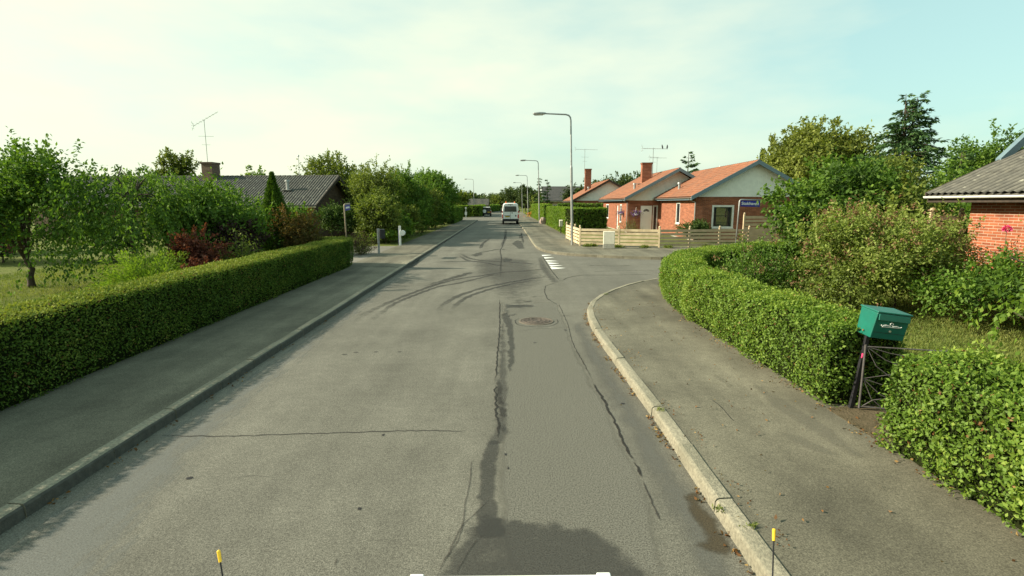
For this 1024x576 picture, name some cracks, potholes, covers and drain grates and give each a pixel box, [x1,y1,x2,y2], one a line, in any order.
manhole cover [519,317,554,325]
crack [594,385,659,517]
